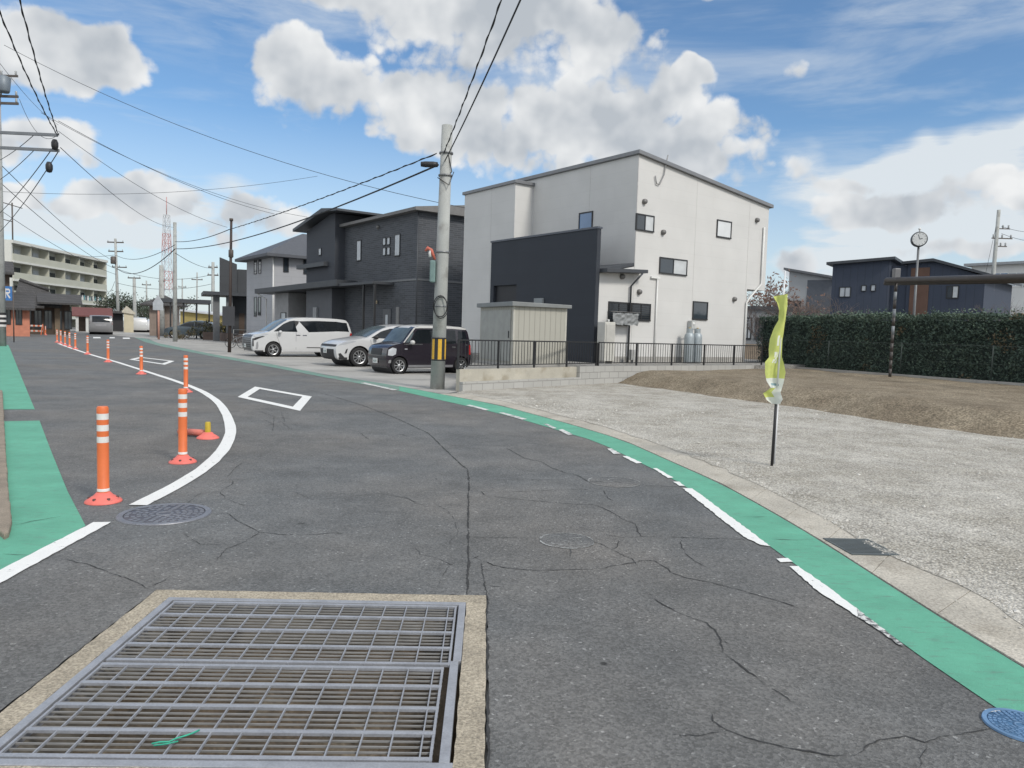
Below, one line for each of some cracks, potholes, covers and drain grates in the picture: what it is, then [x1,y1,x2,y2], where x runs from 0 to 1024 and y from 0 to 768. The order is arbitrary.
crack [186,466,334,557]
manhole cover [981,708,1024,742]
crack [472,445,796,768]
manhole cover [115,503,212,526]
drain grate [823,538,899,556]
crack [679,713,991,766]
manhole cover [587,476,641,487]
drain grate [0,590,486,768]
manhole cover [539,533,594,549]
